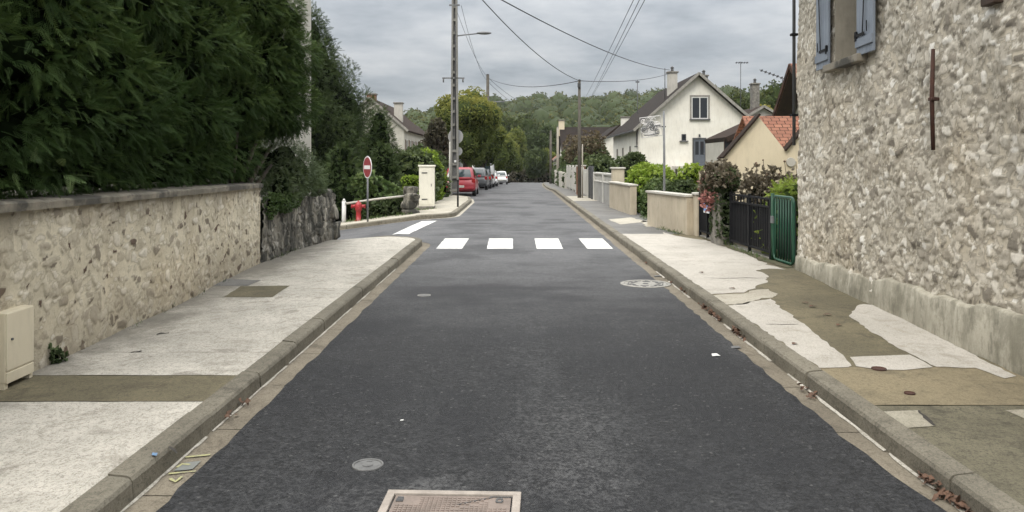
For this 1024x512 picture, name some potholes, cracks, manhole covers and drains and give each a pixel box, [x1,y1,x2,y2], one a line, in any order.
manhole cover [378,490,521,512]
manhole cover [352,458,384,471]
manhole cover [620,280,671,288]
